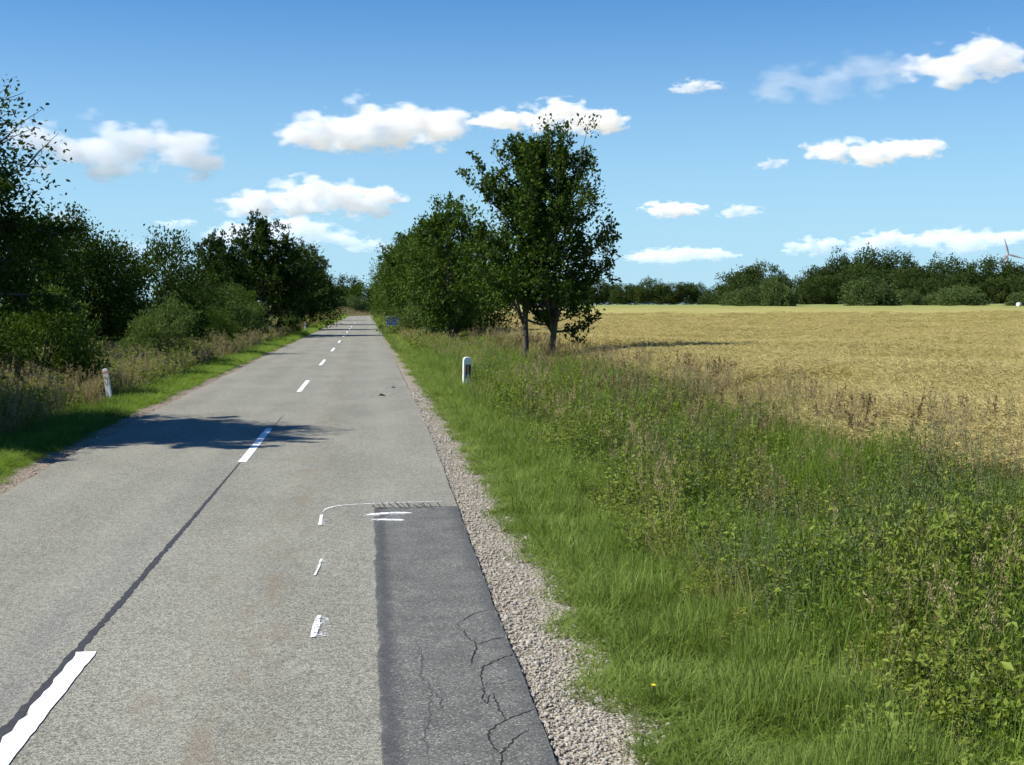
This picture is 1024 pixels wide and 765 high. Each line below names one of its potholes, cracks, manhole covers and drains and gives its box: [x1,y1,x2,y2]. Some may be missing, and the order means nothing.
crack [457,607,536,765]
crack [417,646,444,759]
